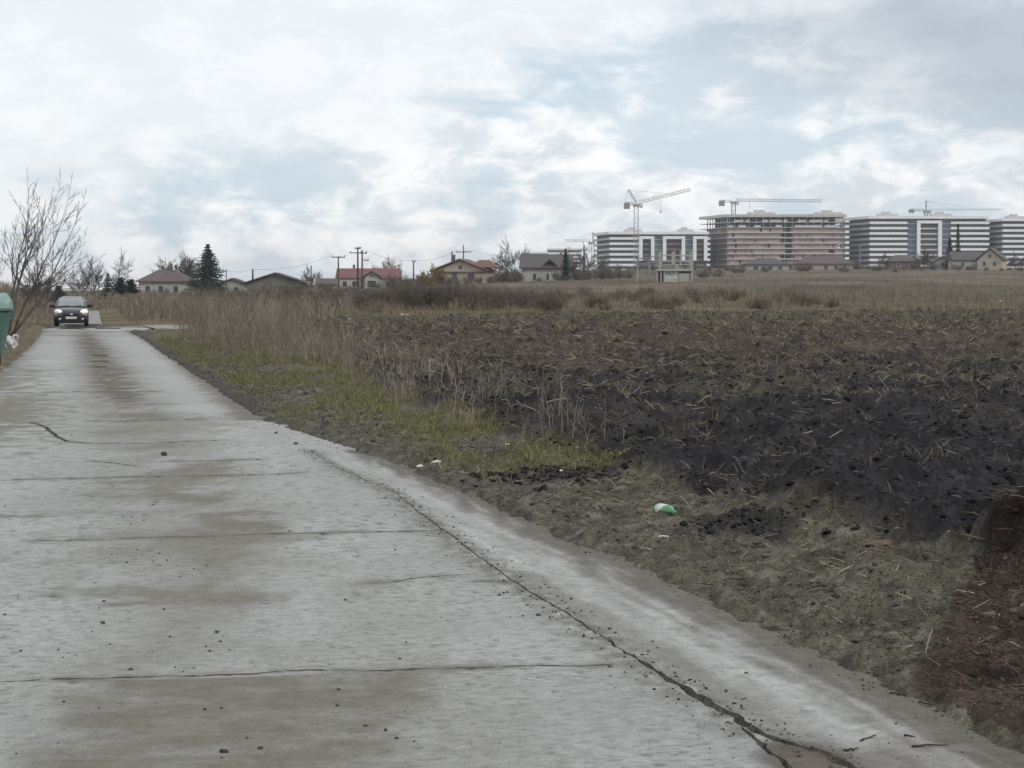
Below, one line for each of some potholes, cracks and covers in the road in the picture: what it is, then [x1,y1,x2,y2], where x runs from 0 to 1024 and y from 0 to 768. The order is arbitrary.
crack [0,450,857,768]
crack [29,422,217,444]
